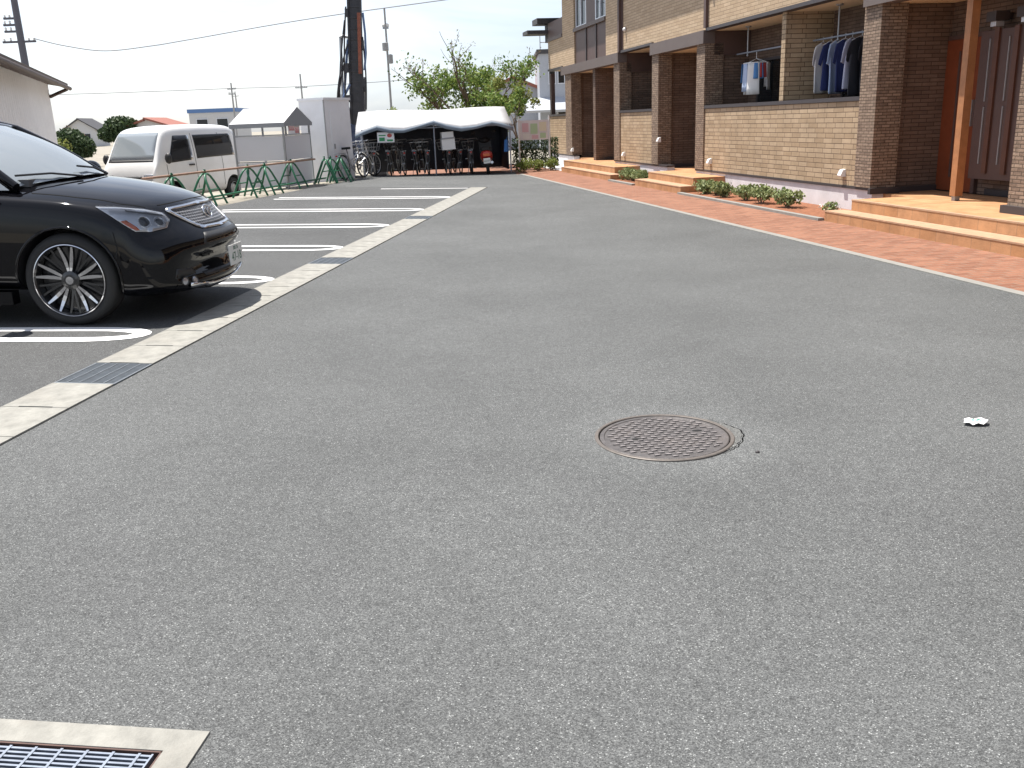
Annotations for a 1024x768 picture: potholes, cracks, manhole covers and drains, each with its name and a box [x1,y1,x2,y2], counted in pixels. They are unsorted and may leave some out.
manhole cover [595,414,742,462]
drain grate [0,719,210,768]
drain grate [54,363,152,385]
